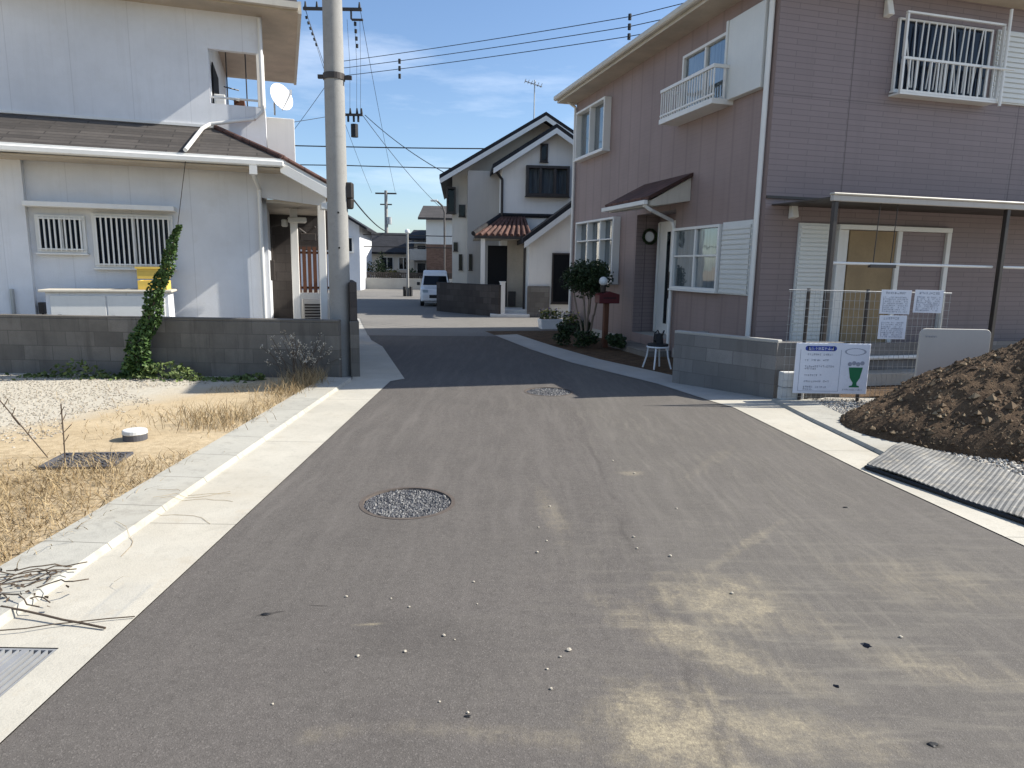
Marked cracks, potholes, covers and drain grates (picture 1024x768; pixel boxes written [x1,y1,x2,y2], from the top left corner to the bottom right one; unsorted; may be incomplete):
manhole cover [524,387,574,396]
drain grate [0,648,57,697]
manhole cover [359,487,455,520]
utility cover [35,452,134,470]
